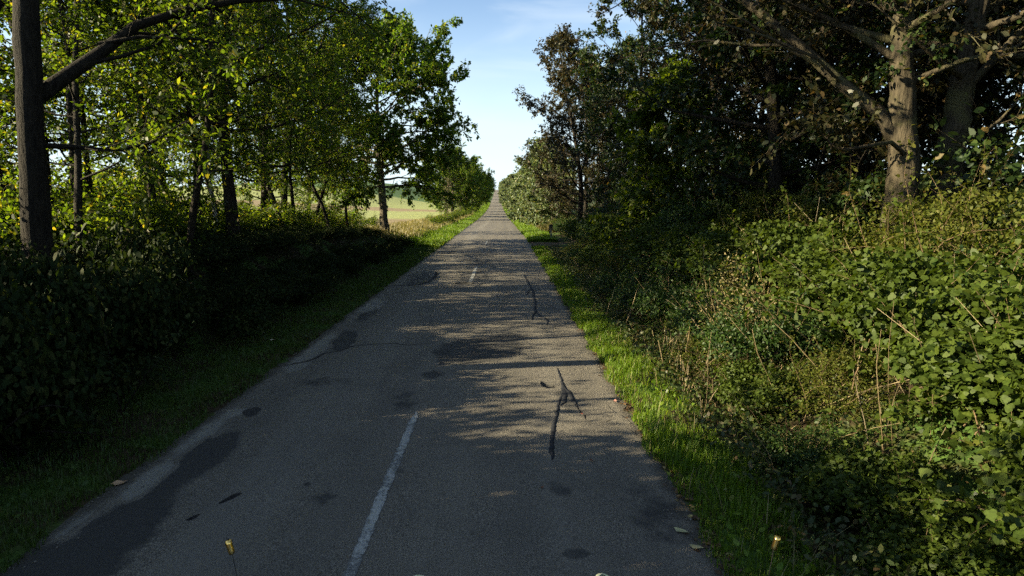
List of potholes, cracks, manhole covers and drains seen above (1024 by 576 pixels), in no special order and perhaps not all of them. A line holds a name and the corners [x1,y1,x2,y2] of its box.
crack [290,343,432,365]
